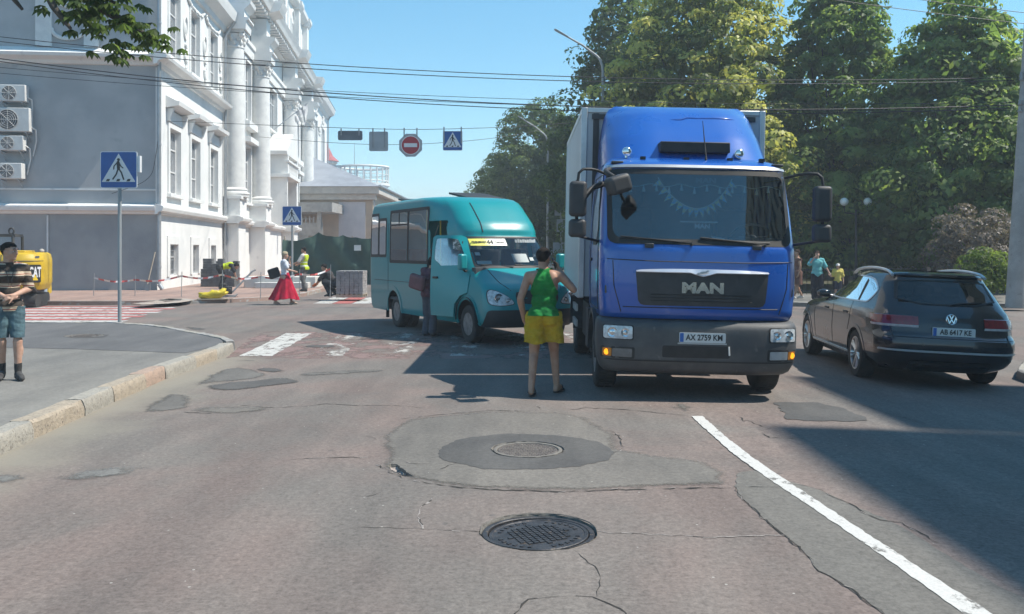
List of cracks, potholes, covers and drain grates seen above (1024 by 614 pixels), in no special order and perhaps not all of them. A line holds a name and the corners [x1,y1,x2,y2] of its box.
manhole cover [480,513,597,551]
crack [294,457,730,545]
manhole cover [491,441,564,458]
pothole [387,464,413,477]
crack [514,551,627,614]
